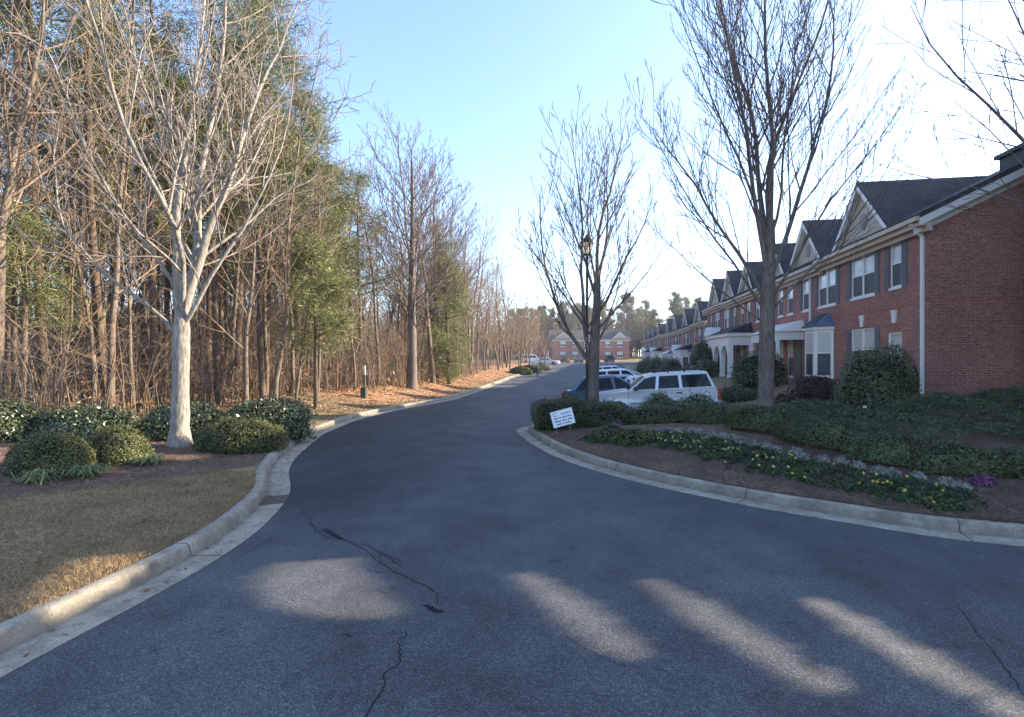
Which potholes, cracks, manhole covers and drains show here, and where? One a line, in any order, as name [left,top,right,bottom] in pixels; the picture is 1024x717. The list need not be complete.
crack [302,516,526,621]
crack [956,603,1022,693]
crack [338,631,407,717]
